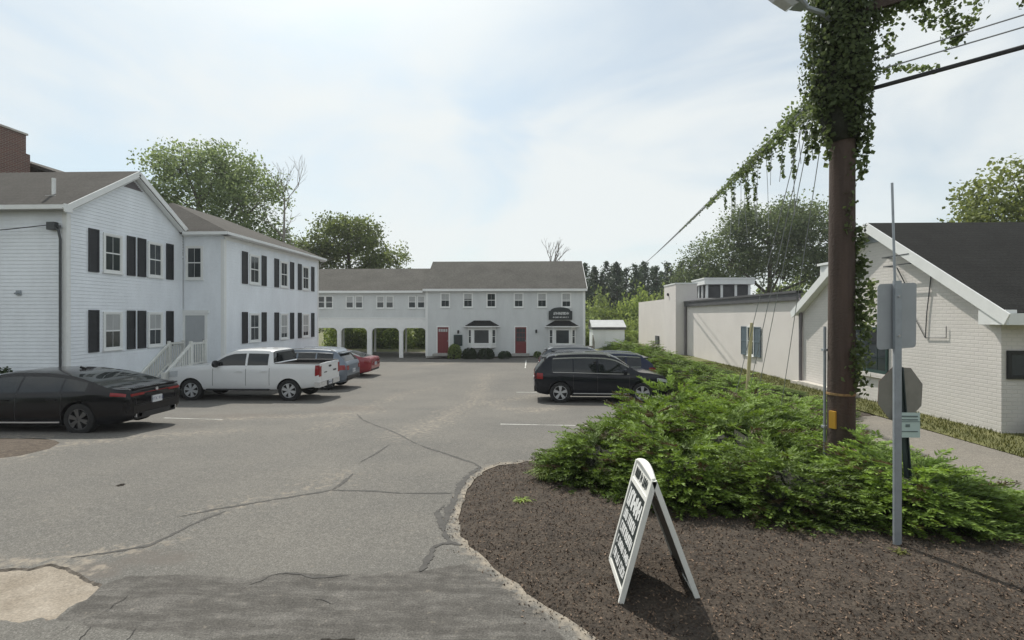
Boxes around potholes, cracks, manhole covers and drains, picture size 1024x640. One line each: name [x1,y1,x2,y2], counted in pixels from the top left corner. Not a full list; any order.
crack [249,572,343,604]
crack [71,414,480,558]
